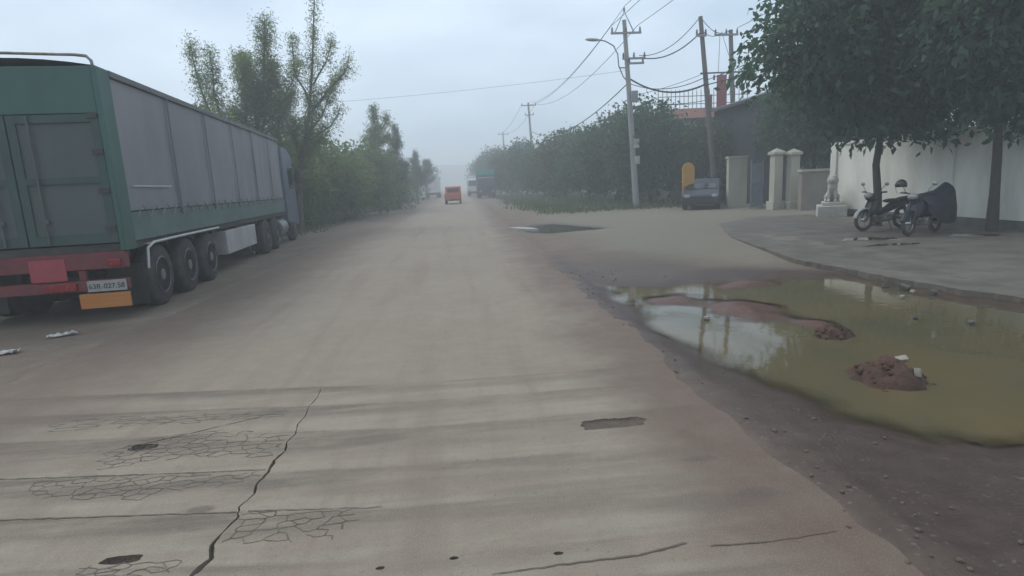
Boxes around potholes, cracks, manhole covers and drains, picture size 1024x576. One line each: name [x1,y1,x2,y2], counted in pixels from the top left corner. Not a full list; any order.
pothole [98,554,143,565]
pothole [580,417,647,430]
pothole [508,224,605,233]
crack [0,390,383,576]
